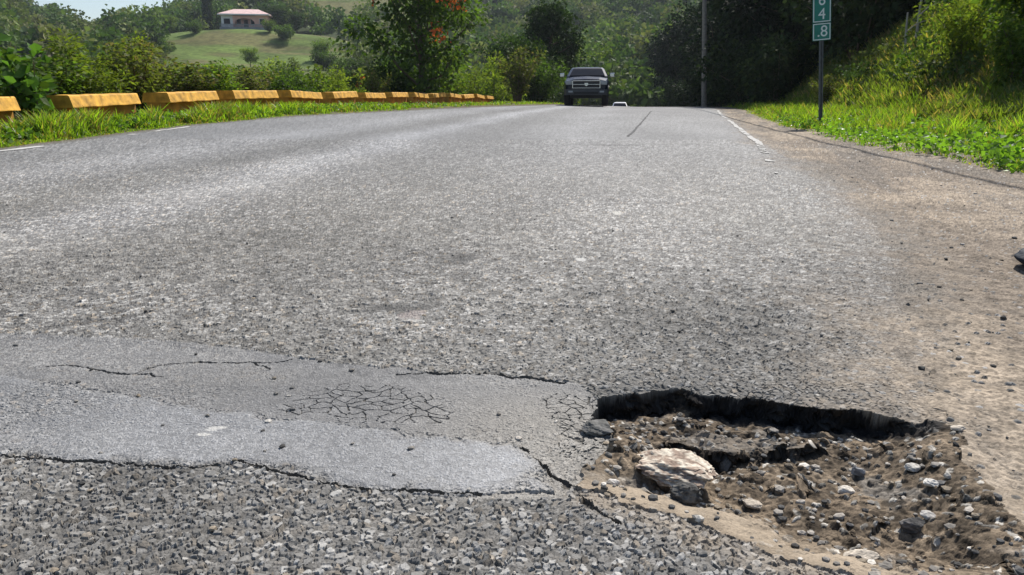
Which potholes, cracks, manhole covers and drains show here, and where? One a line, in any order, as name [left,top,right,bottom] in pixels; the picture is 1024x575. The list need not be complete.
pothole [577,388,1024,575]
crack [281,371,622,525]
crack [45,359,292,377]
crack [0,453,483,497]
